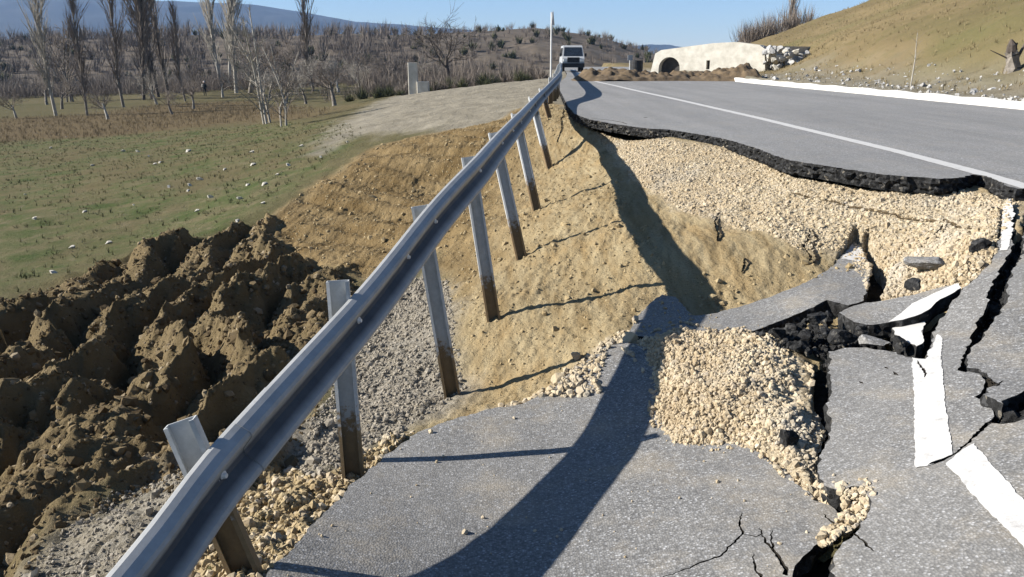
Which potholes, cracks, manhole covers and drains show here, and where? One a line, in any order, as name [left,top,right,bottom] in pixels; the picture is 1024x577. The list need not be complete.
crack [663,514,873,577]
crack [813,370,829,474]
crack [979,251,1018,341]
